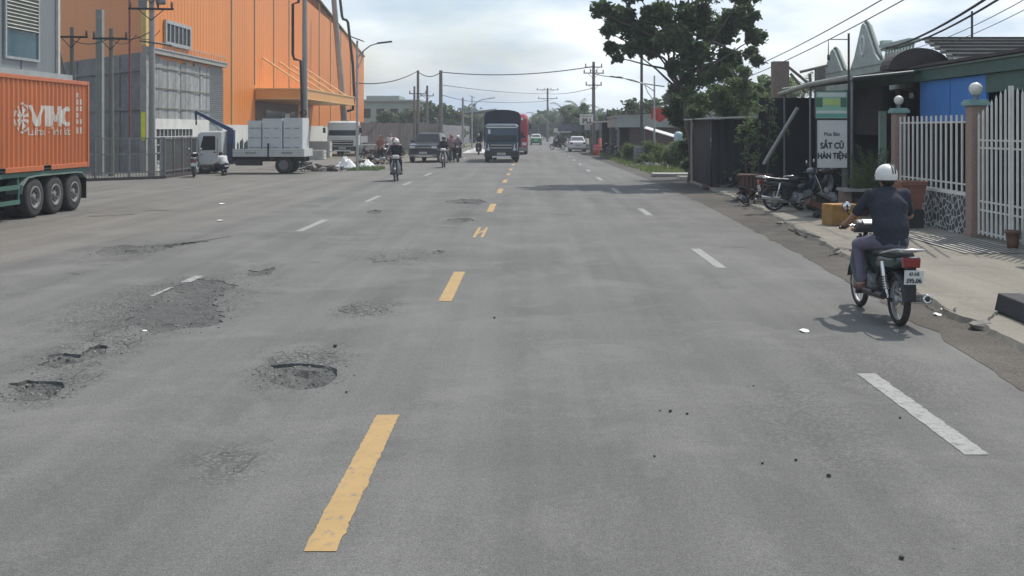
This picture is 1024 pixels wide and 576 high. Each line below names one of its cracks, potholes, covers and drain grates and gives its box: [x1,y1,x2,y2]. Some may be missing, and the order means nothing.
pothole [0,377,88,411]
pothole [23,338,131,374]
pothole [245,356,356,395]
pothole [111,276,250,336]
